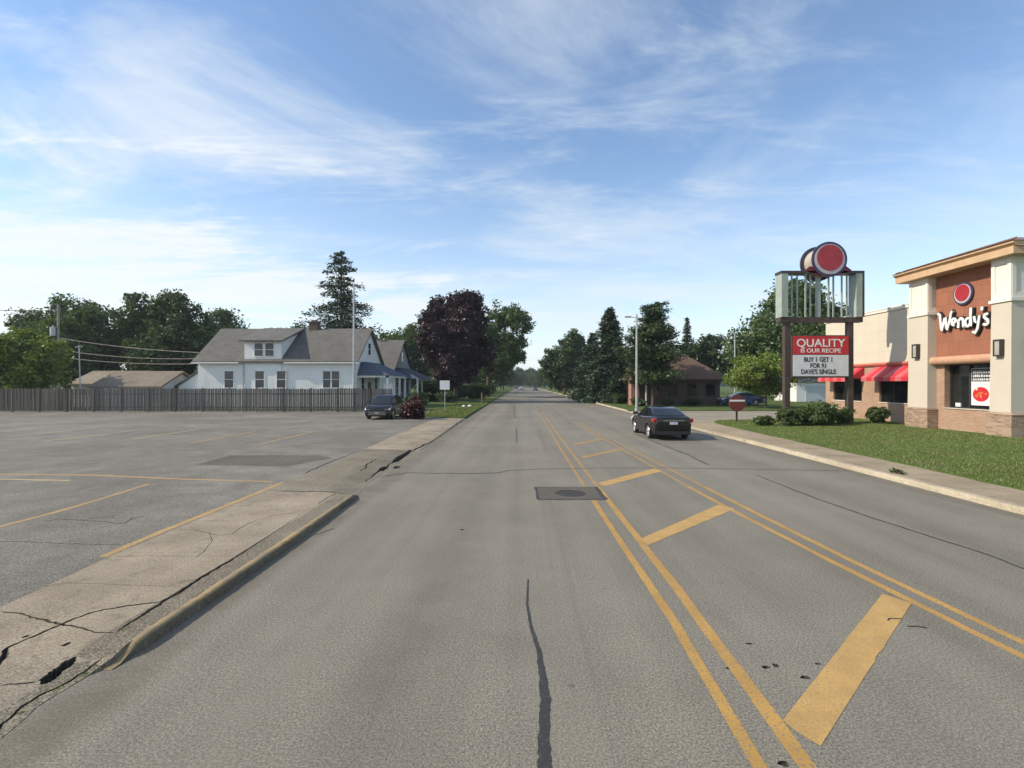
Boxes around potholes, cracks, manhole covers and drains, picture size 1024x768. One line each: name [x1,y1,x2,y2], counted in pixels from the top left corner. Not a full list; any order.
crack [0,513,334,665]
crack [304,450,848,476]
pothole [38,656,77,685]
